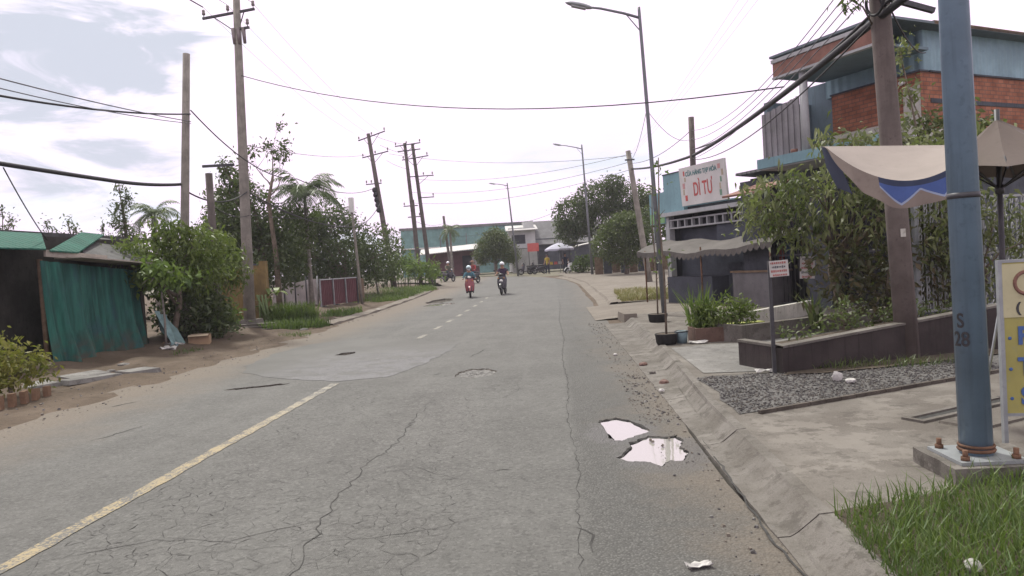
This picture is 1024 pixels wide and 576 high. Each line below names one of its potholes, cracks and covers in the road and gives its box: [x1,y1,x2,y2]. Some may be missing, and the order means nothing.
pothole [598,418,650,441]
pothole [616,435,689,467]
crack [11,391,485,576]
pothole [455,368,496,378]
